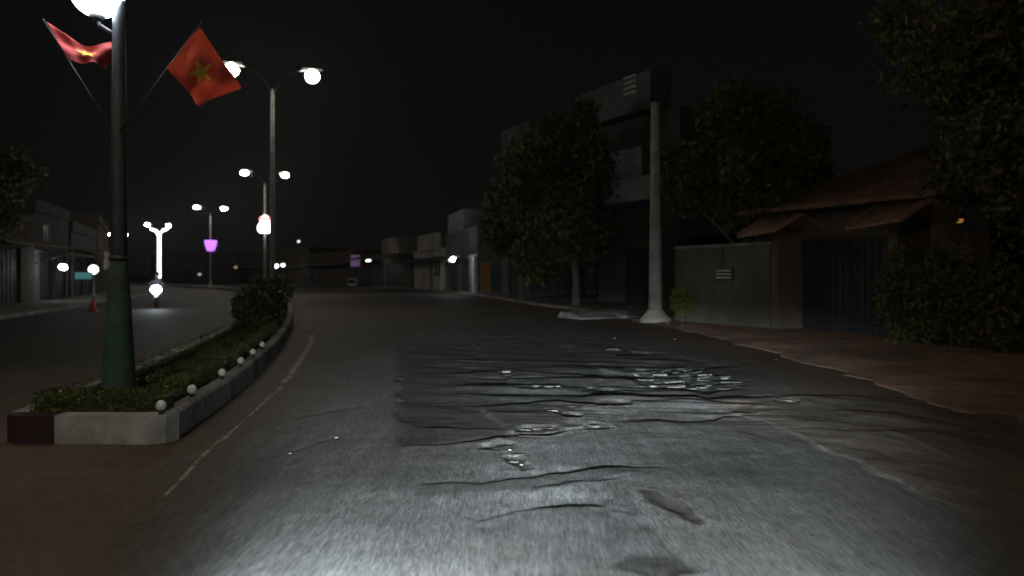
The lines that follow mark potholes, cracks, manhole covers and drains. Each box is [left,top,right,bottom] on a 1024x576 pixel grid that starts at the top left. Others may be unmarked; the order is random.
pothole [601,554,709,576]
pothole [494,370,517,380]
pothole [633,487,715,528]
pothole [497,448,539,472]
crack [715,361,793,369]
pothole [539,406,587,419]
pothole [622,367,747,395]
pothole [474,438,521,451]
crack [414,464,675,524]
pothole [579,420,618,430]
pothole [508,423,571,437]
crack [395,397,752,446]
